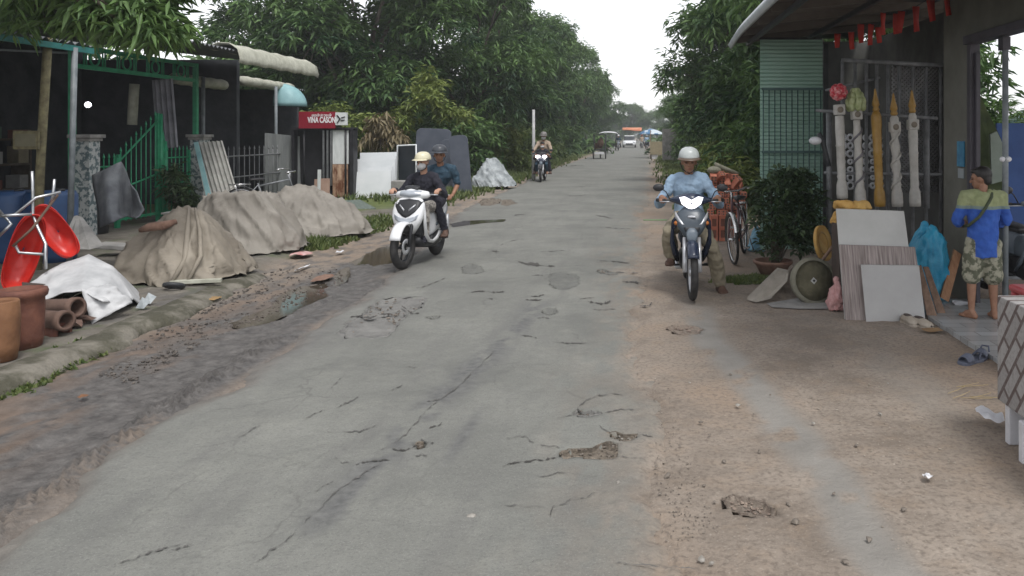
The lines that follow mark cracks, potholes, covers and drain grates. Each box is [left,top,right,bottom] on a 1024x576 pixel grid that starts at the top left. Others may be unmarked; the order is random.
pothole [721,494,776,518]
pothole [573,409,602,417]
pothole [666,325,703,335]
pothole [606,431,638,441]
crack [259,352,493,560]
pothole [558,441,618,460]
pothole [337,296,427,339]
